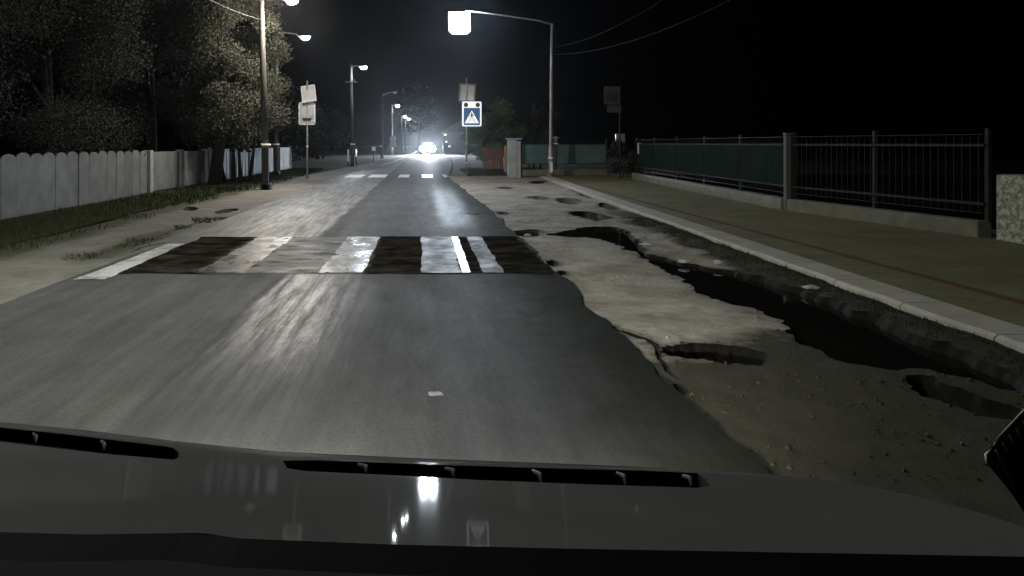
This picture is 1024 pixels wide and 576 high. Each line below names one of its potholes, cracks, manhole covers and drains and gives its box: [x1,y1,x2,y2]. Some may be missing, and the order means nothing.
pothole [569,211,613,221]
pothole [902,375,1023,420]
crack [611,325,678,379]
pothole [546,226,1024,393]
pothole [514,229,542,237]
